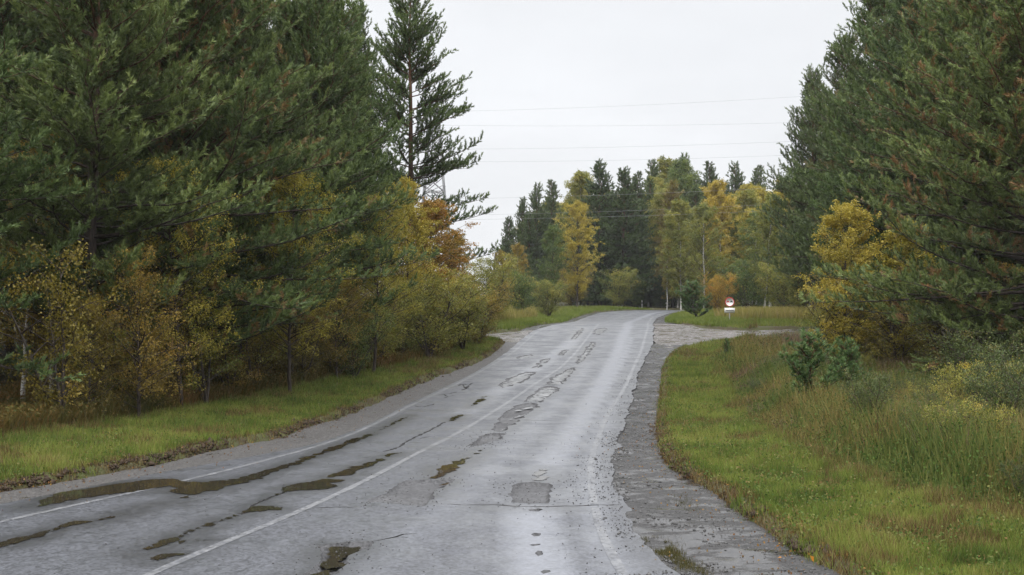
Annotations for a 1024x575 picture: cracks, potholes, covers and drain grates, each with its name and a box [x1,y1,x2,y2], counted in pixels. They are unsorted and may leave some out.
pothole [498,372,536,388]
pothole [545,367,575,385]
pothole [470,433,505,447]
pothole [491,402,540,432]
pothole [303,541,372,575]
pothole [524,386,560,403]
